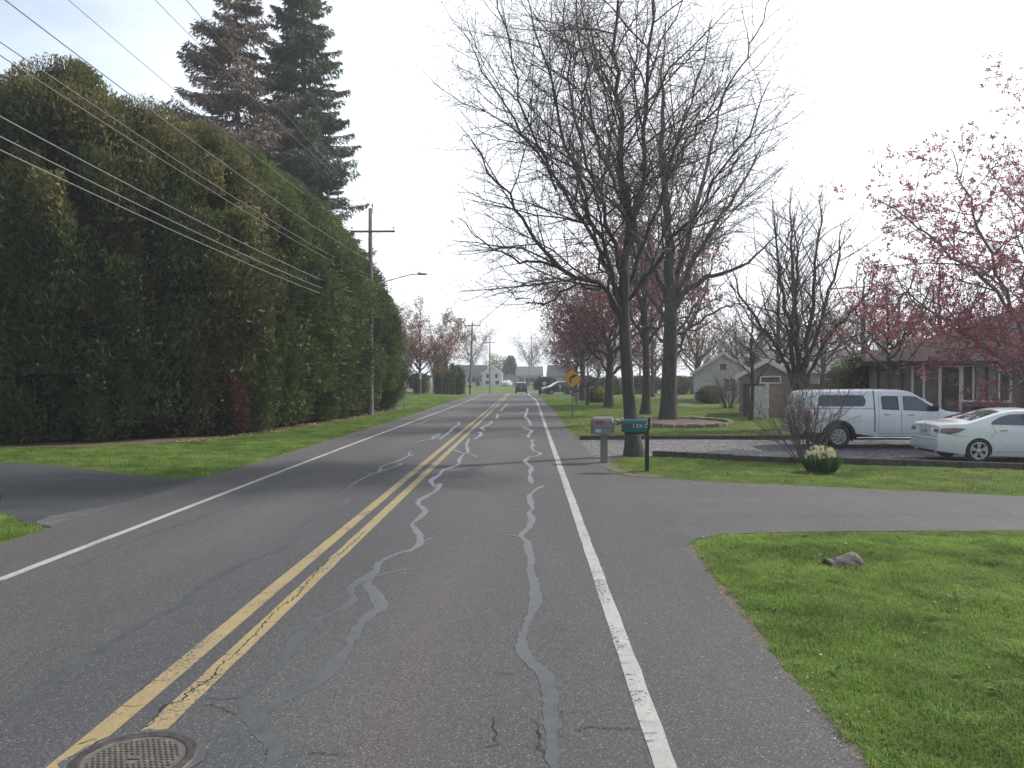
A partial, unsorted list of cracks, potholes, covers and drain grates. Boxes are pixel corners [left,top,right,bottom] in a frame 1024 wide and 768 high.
crack [525,628,657,755]
manhole cover [58,727,209,768]
